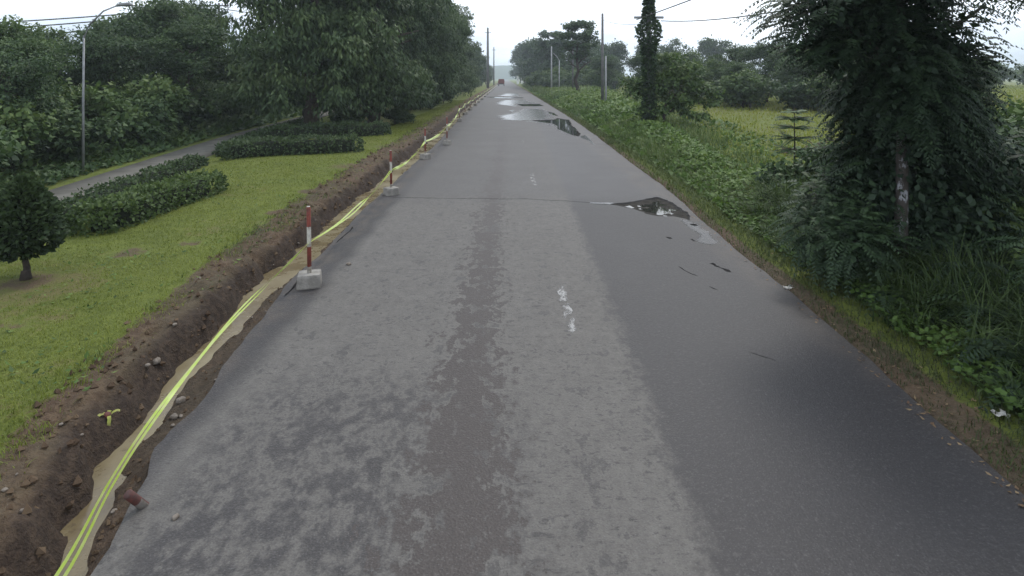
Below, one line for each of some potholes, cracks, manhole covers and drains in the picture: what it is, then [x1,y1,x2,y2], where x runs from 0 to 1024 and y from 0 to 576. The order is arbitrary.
pothole [612,197,690,220]
pothole [532,118,581,136]
